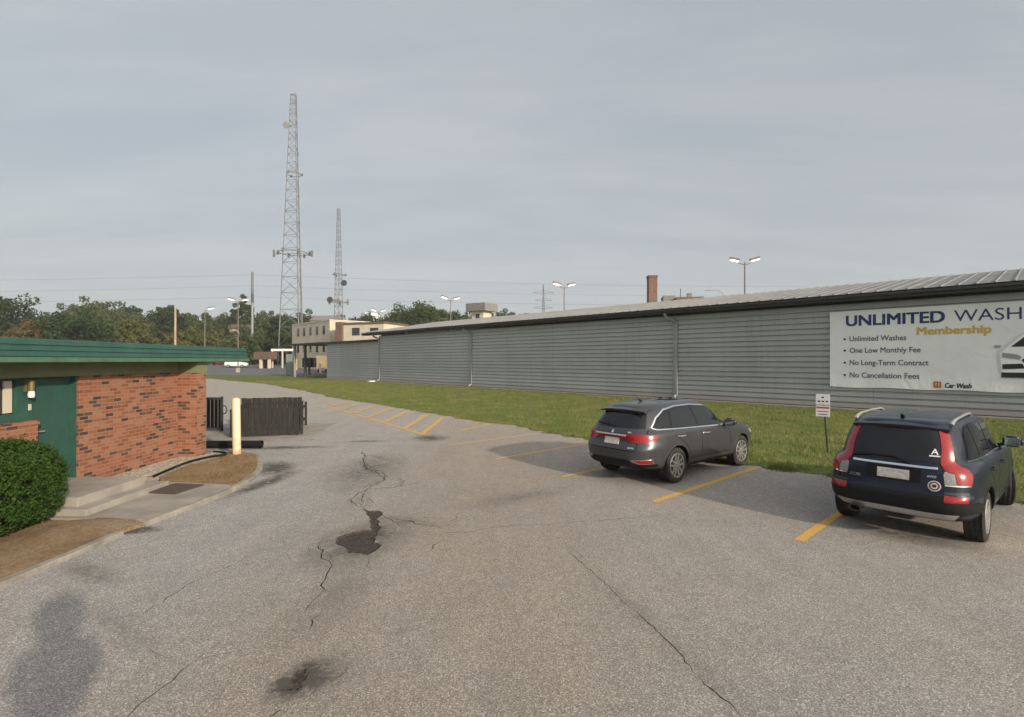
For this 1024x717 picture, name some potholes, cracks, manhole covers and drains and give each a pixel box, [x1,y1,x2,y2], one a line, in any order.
pothole [279,669,309,691]
crack [348,444,665,551]
crack [305,534,343,630]
crack [127,641,249,717]
pothole [335,509,383,555]
